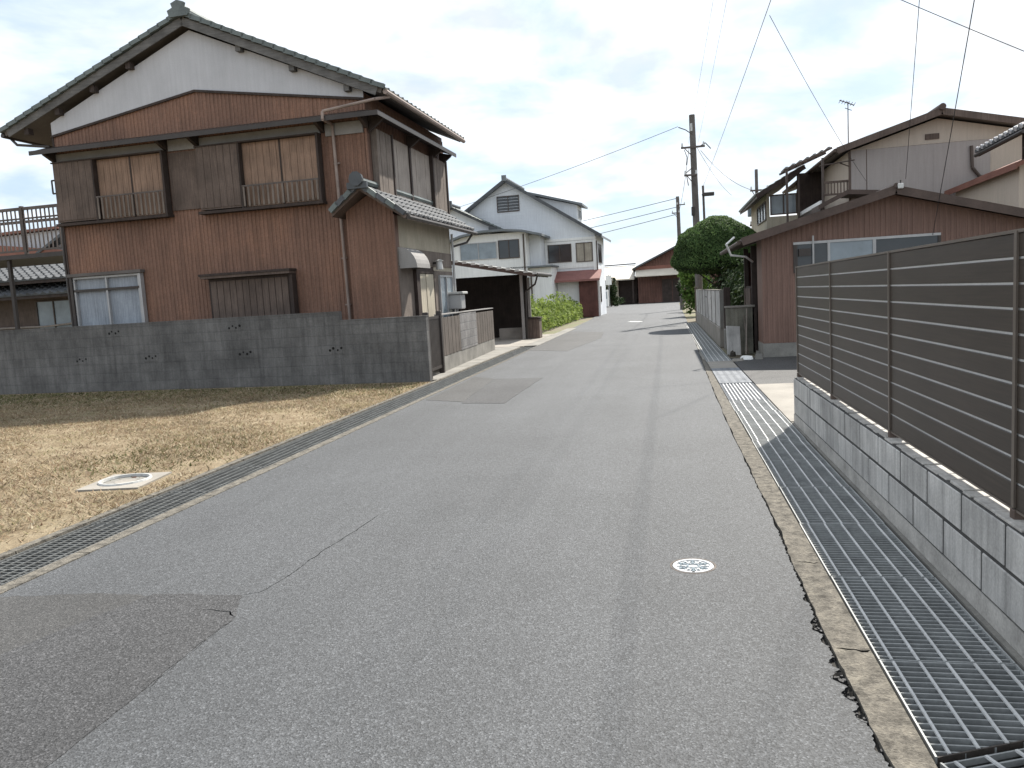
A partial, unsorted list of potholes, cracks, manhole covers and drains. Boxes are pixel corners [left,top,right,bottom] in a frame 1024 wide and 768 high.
drain grate [764,459,849,490]
drain grate [799,523,934,580]
drain grate [372,399,417,409]
drain grate [314,419,373,433]
drain grate [724,390,768,401]
drain grate [277,432,344,448]
drain grate [169,466,267,492]
drain grate [831,576,1016,665]
drain grate [736,410,790,425]
drain grate [940,748,1024,768]
drain grate [780,486,885,524]
manhole cover [670,558,717,574]
